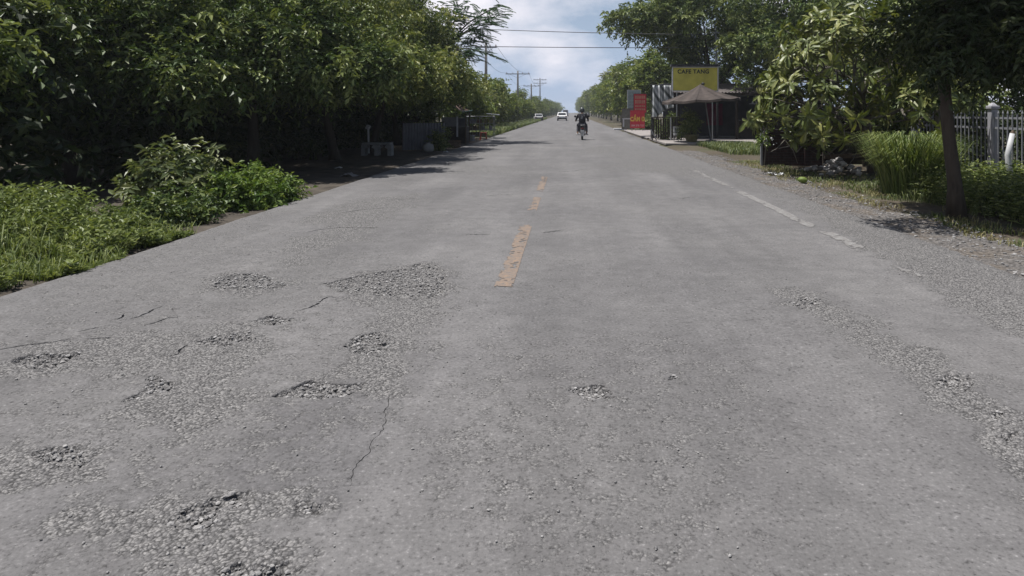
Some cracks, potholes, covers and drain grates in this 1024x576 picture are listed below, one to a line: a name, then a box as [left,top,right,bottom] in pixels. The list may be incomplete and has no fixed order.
pothole [0,346,103,374]
pothole [331,328,407,359]
pothole [146,482,271,539]
pothole [313,261,458,301]
pothole [201,271,305,293]
pothole [99,370,192,411]
pothole [273,492,342,527]
crack [0,306,208,359]
pothole [259,373,381,406]
crack [291,294,341,313]
pothole [240,313,308,329]
